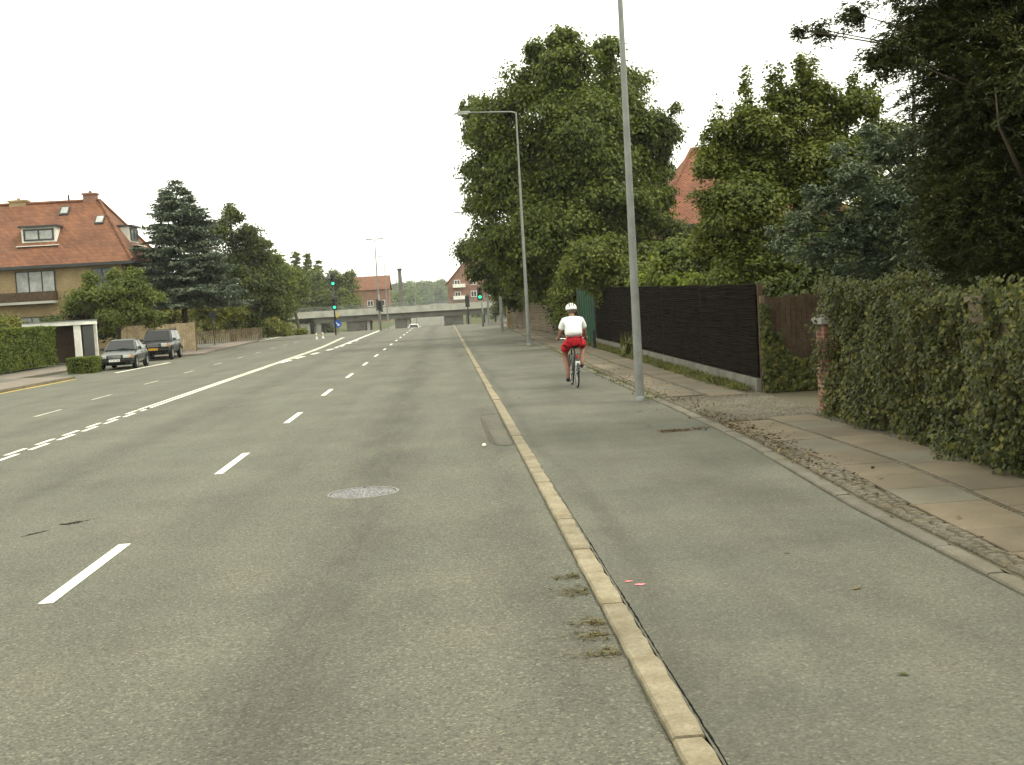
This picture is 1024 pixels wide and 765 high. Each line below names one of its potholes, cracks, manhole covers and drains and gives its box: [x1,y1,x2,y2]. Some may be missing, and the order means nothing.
manhole cover [327,486,399,499]
